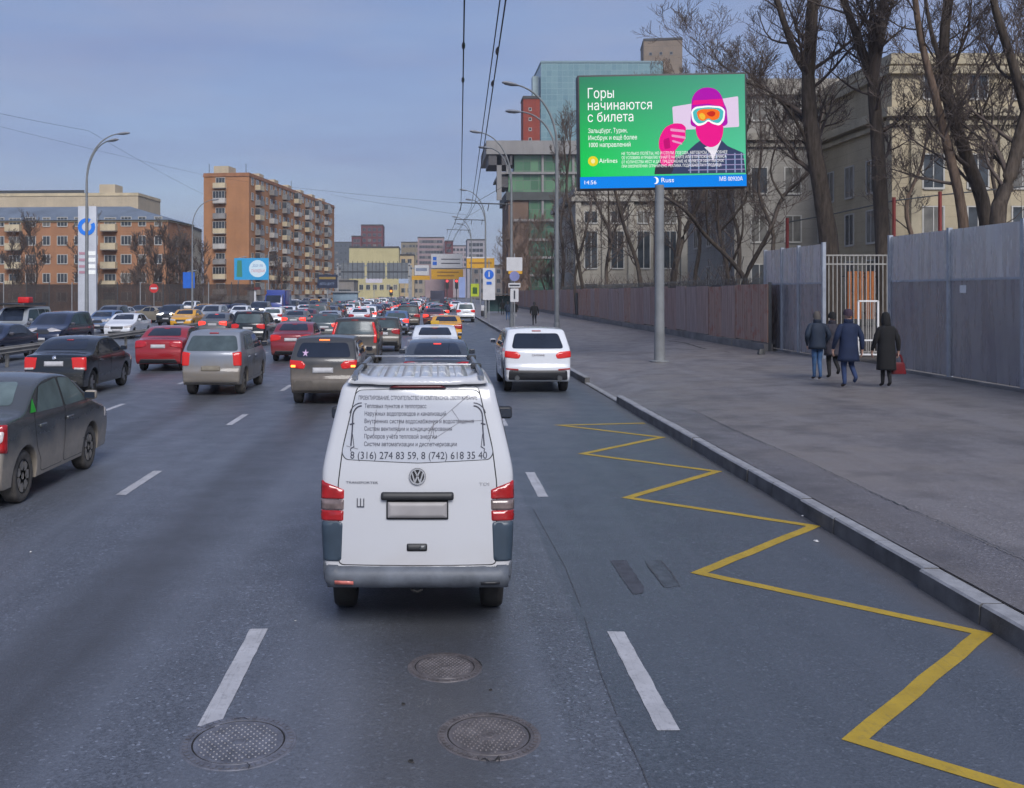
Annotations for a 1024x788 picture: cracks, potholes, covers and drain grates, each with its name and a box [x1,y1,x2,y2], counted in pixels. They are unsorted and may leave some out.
manhole cover [437,712,541,761]
manhole cover [179,716,297,771]
manhole cover [407,652,482,683]
